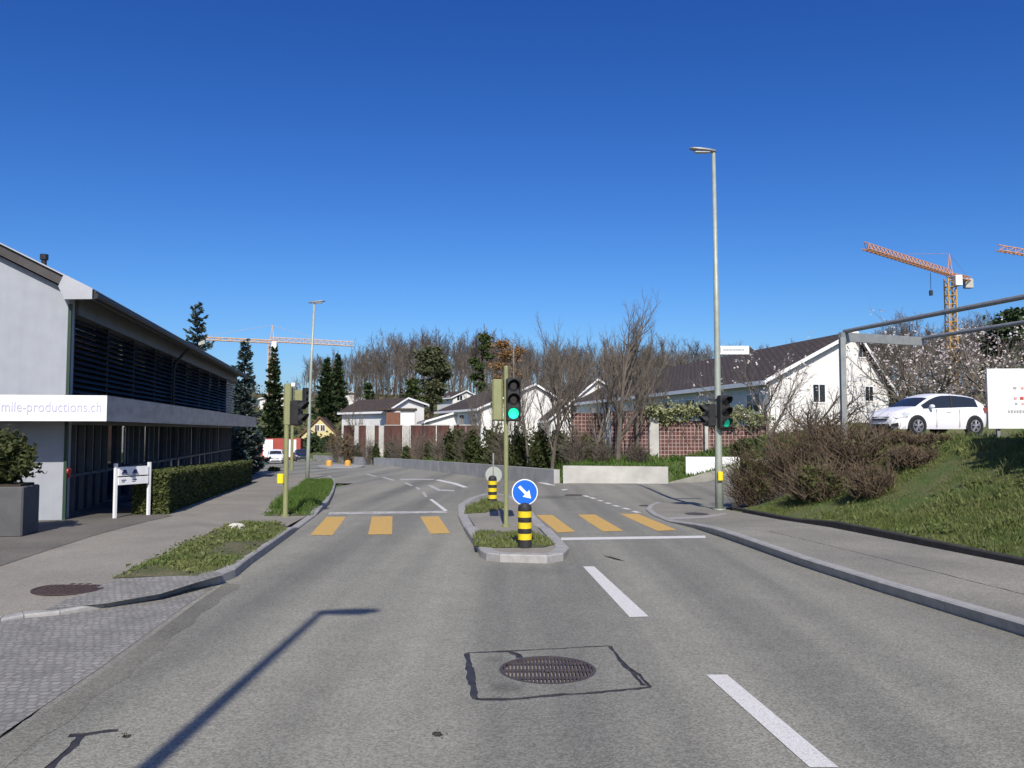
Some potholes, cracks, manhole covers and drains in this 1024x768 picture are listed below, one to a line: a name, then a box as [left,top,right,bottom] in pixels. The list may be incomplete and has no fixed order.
manhole cover [30,583,104,596]
